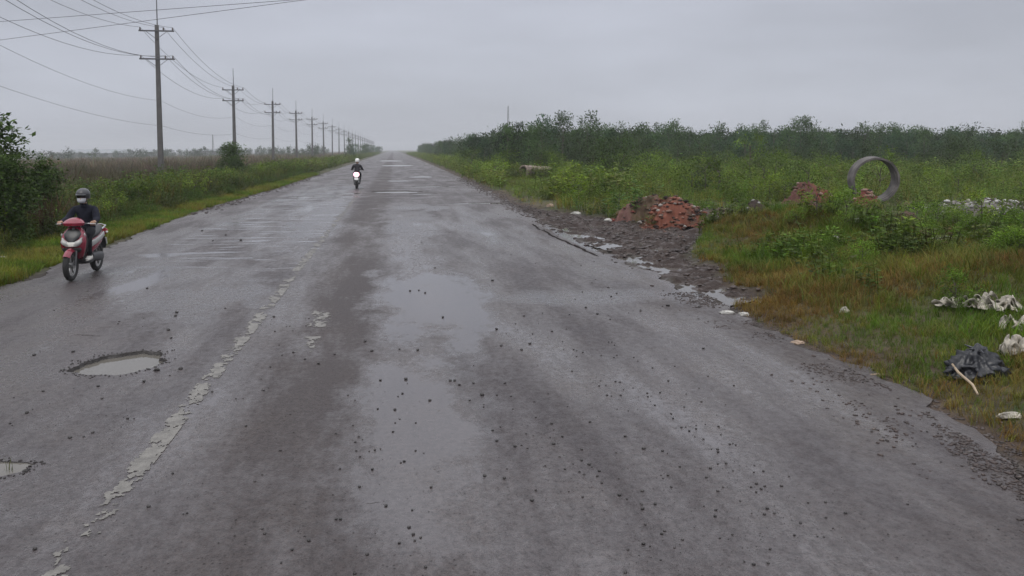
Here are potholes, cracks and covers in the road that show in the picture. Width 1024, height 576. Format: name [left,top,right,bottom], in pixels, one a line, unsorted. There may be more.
pothole [0,461,36,476]
crack [532,224,599,257]
pothole [67,350,168,375]
